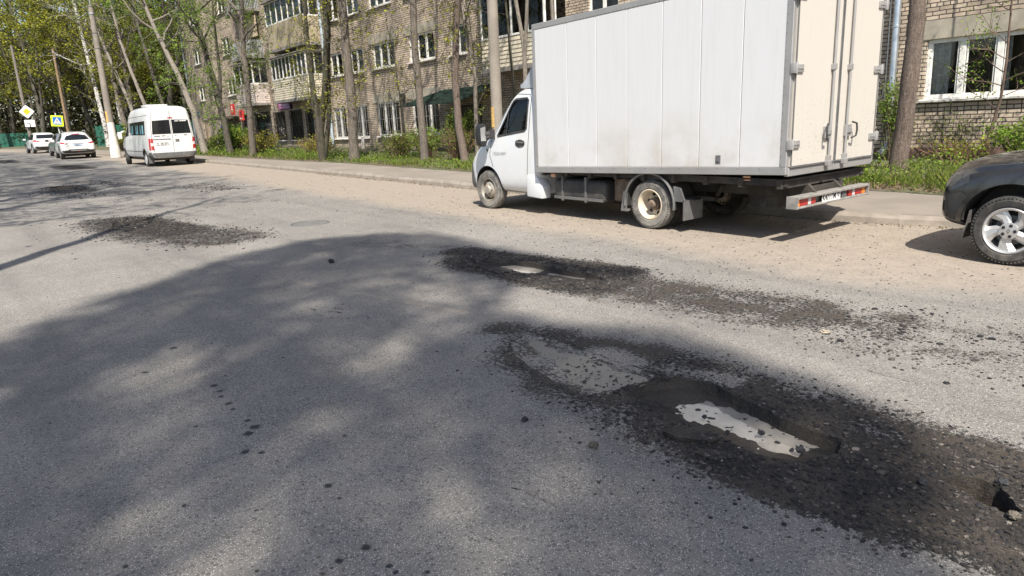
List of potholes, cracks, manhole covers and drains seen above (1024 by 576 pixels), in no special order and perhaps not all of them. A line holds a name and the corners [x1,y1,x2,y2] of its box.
pothole [630,379,842,461]
pothole [511,334,656,394]
pothole [472,260,606,283]
pothole [939,476,1023,513]
